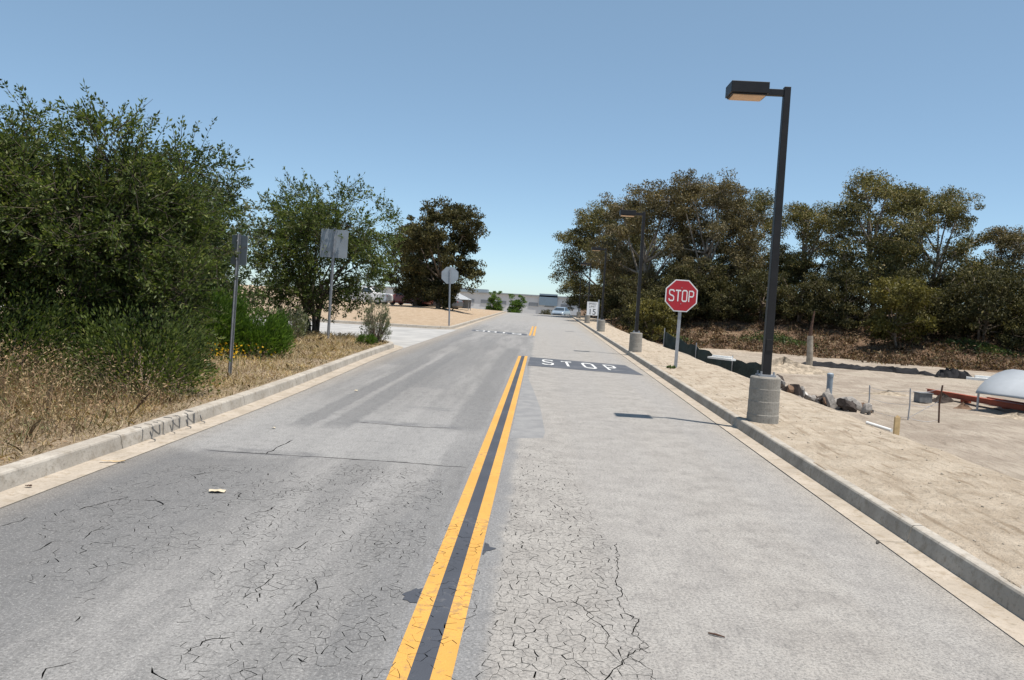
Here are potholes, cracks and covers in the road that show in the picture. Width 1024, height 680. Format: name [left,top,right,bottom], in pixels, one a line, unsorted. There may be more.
crack [29,464,482,680]
crack [475,446,656,680]
